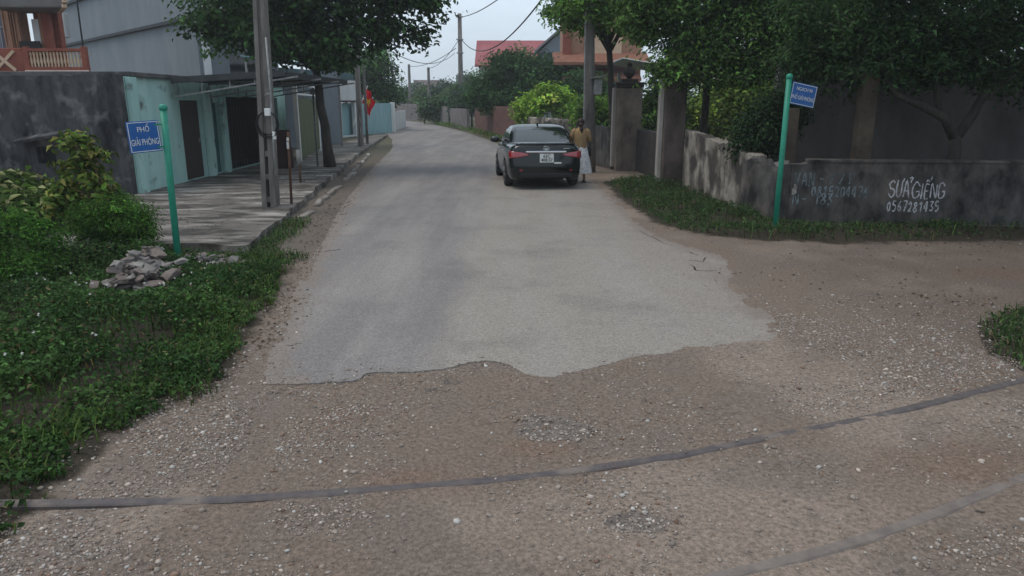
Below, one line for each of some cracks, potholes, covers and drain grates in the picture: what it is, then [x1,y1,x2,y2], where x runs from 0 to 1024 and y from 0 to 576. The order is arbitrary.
pothole [603,511,673,533]
pothole [515,415,591,441]
